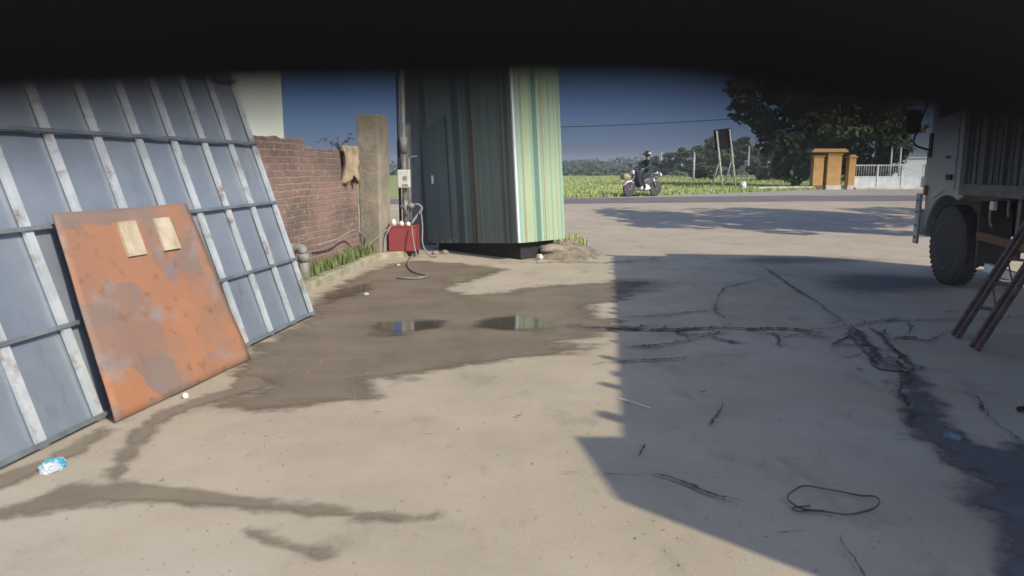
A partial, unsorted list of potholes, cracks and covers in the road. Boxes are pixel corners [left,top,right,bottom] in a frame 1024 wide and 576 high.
crack [595,473,742,502]
crack [840,533,865,576]
crack [600,277,951,440]
crack [946,387,1024,445]
